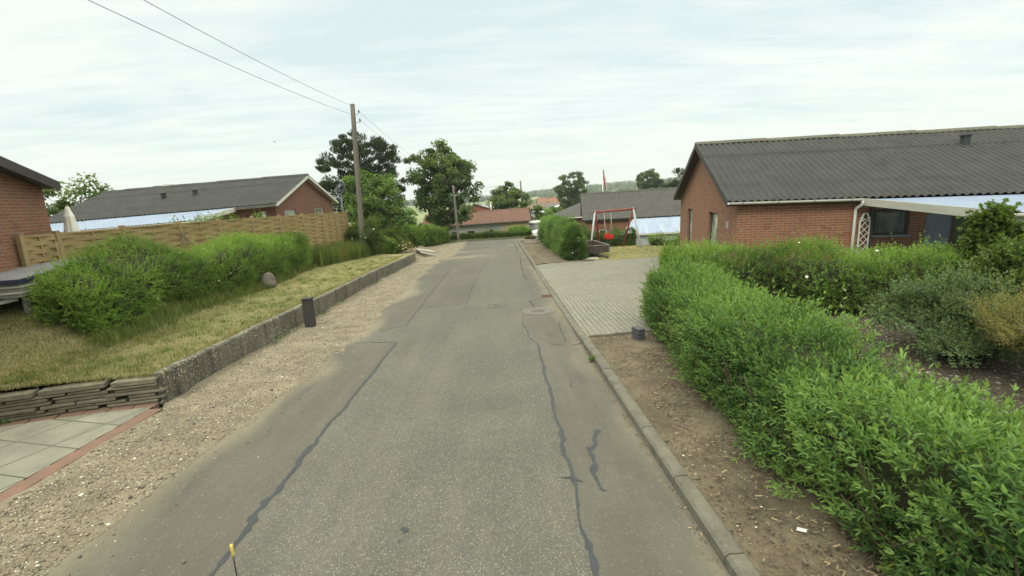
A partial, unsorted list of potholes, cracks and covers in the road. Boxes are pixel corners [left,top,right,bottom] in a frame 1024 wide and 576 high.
manhole cover [522,307,555,315]
